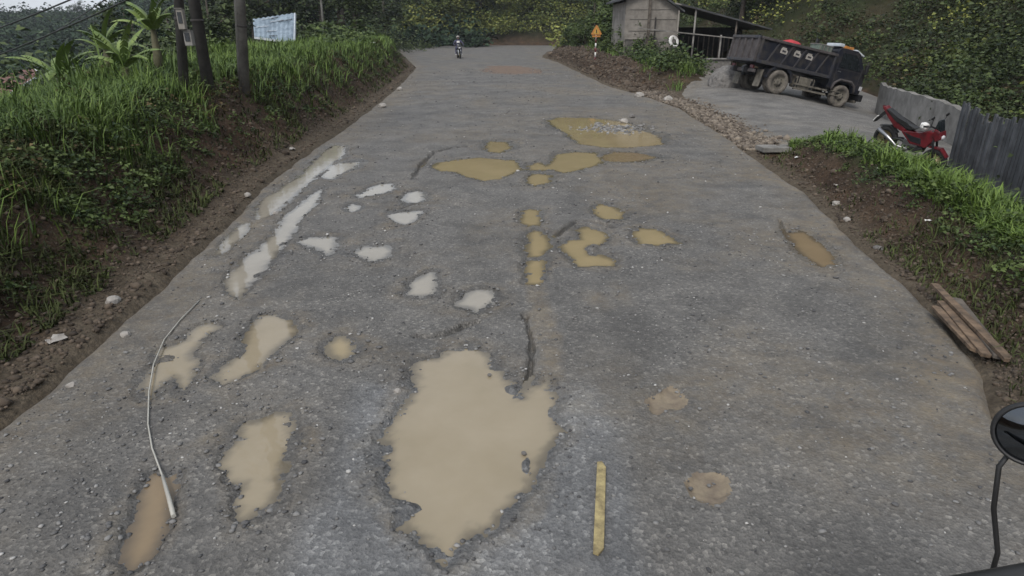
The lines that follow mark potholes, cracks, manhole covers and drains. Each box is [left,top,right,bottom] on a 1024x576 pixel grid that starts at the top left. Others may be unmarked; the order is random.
pothole [626,226,688,247]
pothole [773,228,846,268]
pothole [360,338,573,574]
pothole [208,405,314,527]
pothole [421,156,527,182]
pothole [291,233,348,257]
crack [522,314,536,381]
pothole [515,226,559,258]
pothole [539,116,673,149]
pothole [204,310,306,388]
pothole [587,200,635,222]
pothole [513,206,548,227]
